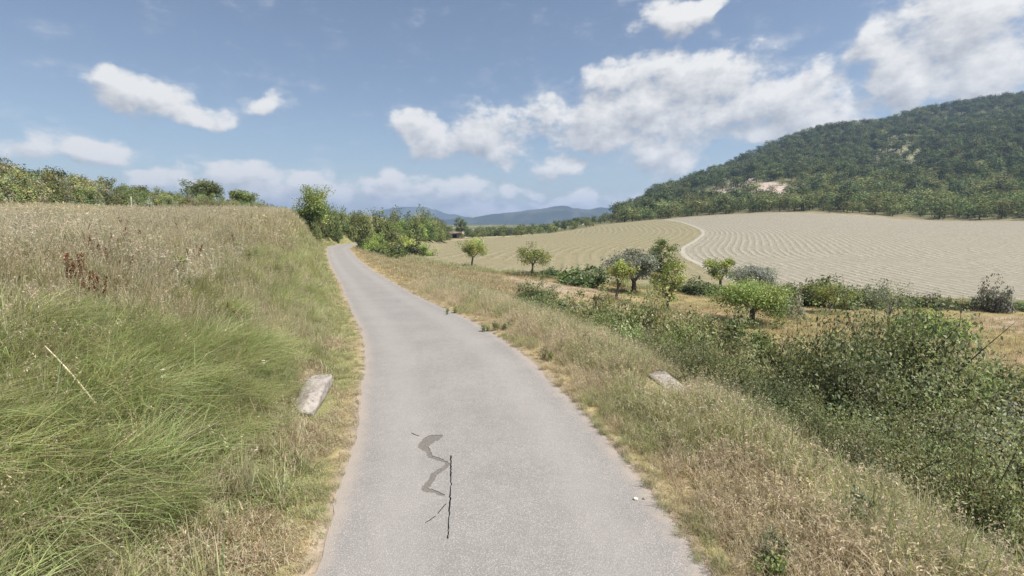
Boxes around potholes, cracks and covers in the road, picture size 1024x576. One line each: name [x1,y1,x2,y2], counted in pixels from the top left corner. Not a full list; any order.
crack [412,433,452,539]
